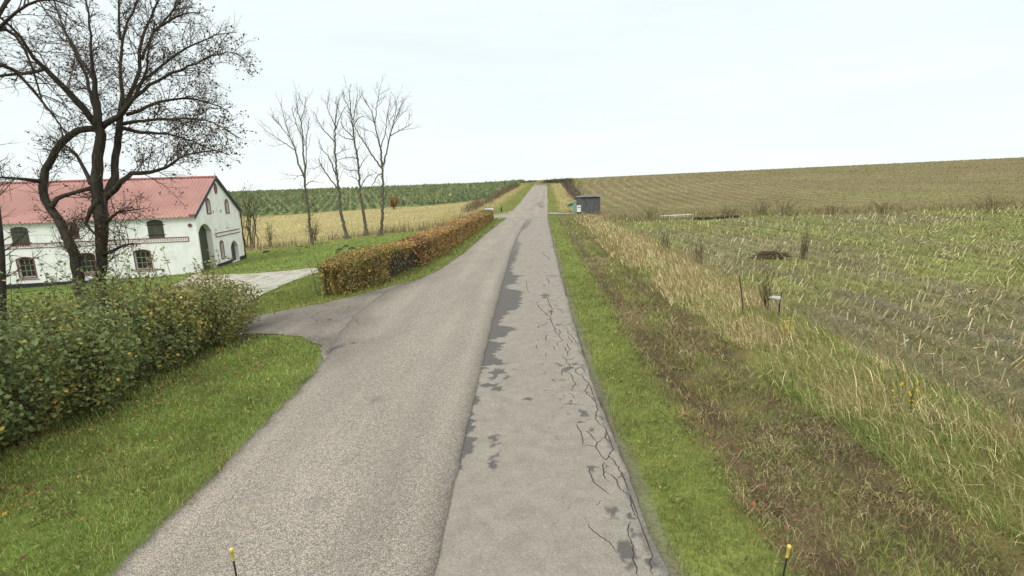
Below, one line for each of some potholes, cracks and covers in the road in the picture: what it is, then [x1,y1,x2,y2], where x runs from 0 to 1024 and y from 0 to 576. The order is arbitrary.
crack [526,278,653,576]
